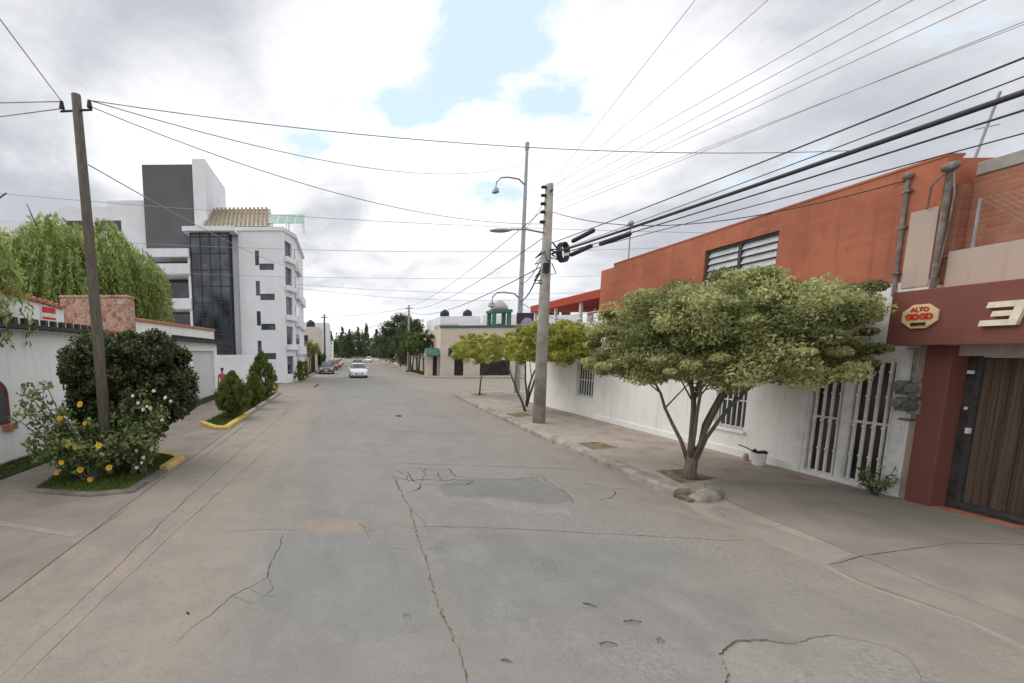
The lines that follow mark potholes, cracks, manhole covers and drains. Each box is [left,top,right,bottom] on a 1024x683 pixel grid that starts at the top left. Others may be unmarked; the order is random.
crack [173,535,283,647]
crack [359,463,785,683]
